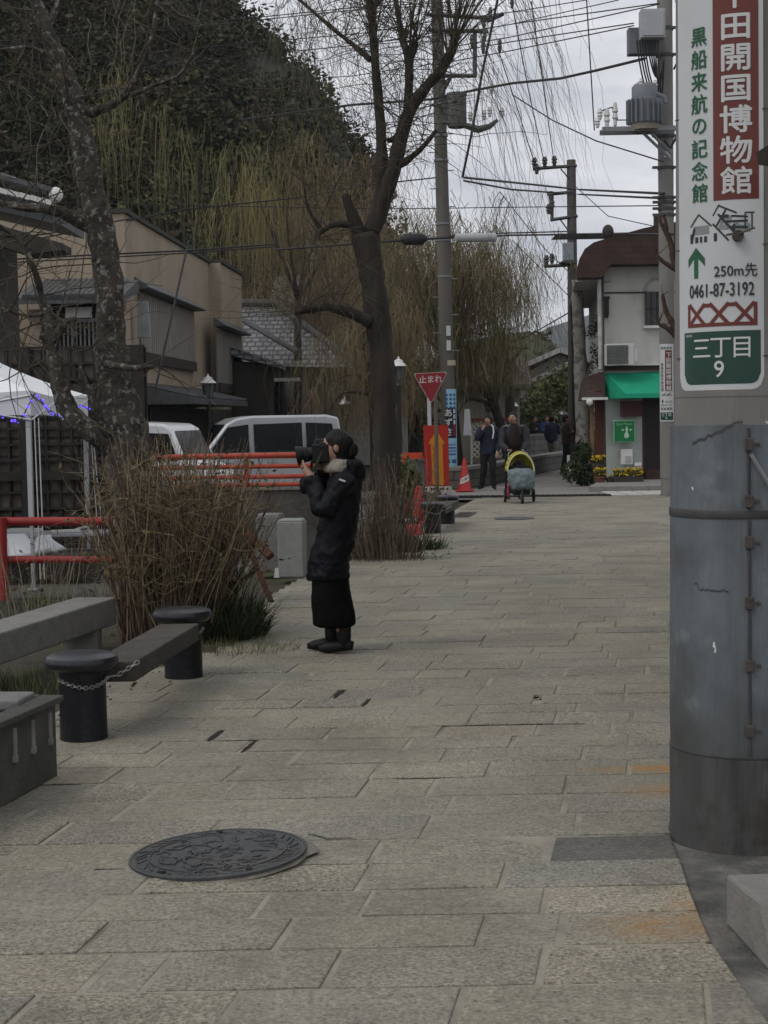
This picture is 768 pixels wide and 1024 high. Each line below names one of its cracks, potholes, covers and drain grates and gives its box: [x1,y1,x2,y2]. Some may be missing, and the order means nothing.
manhole cover [128,828,318,883]
